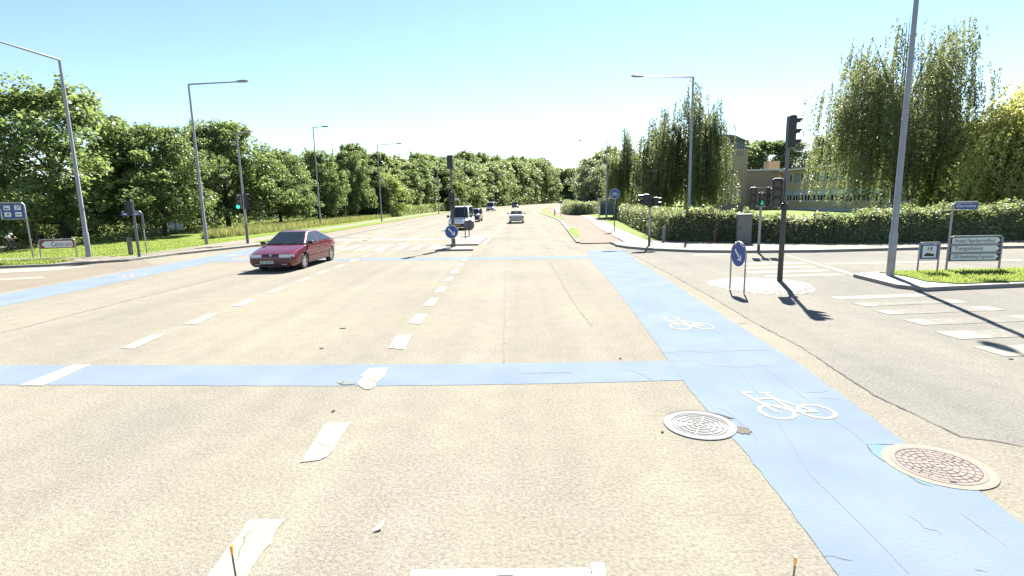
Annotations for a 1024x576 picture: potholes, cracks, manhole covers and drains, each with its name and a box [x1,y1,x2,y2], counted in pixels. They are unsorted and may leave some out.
manhole cover [664,410,737,441]
crack [550,262,593,326]
manhole cover [881,444,1000,491]
